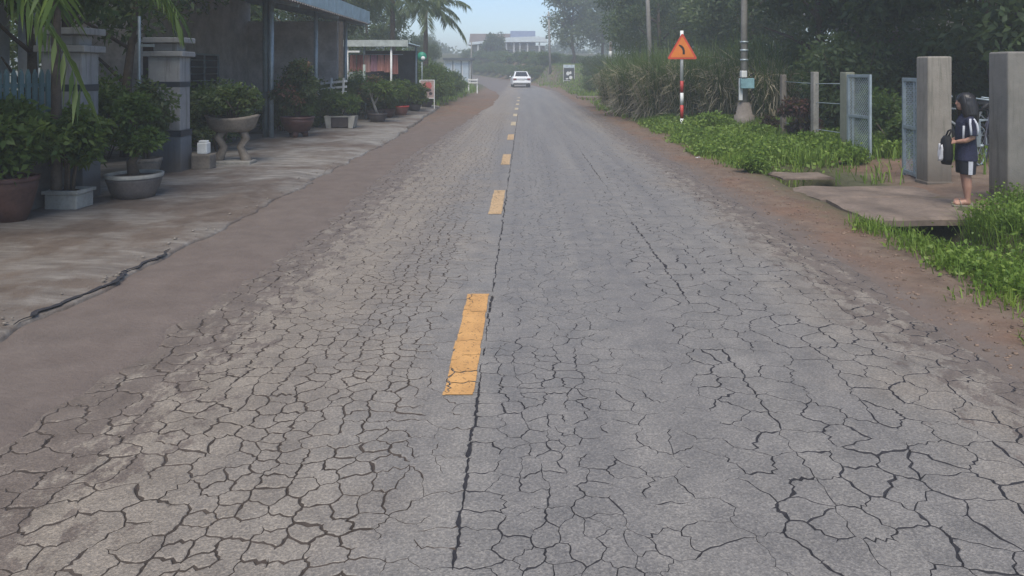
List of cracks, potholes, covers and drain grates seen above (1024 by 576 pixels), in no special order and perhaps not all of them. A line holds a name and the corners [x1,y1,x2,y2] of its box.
crack [13,249,169,325]
crack [426,115,1024,576]
